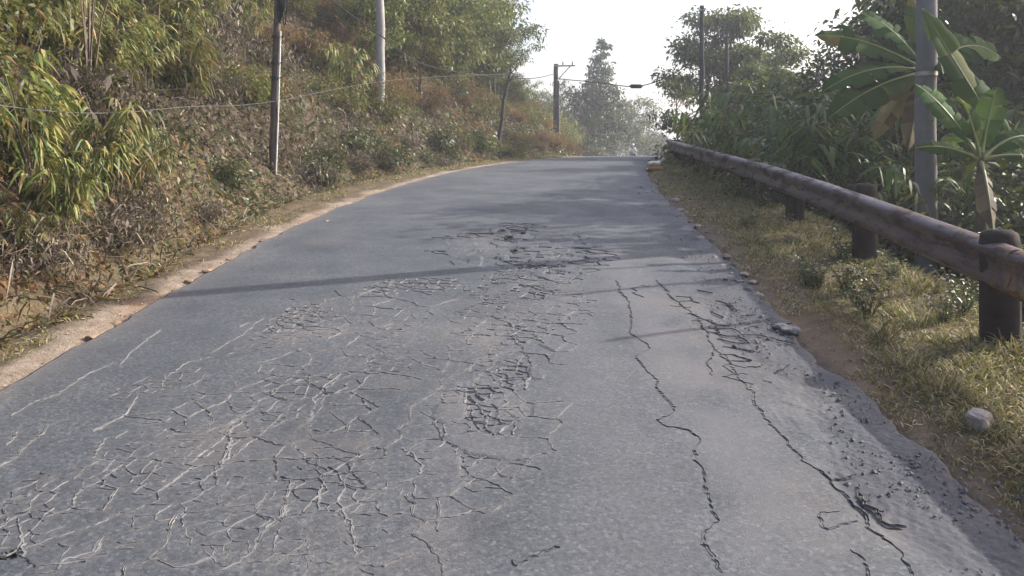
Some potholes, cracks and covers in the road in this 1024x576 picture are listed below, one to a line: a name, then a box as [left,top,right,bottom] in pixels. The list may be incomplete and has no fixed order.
crack [631,280,915,576]
crack [0,223,621,576]
